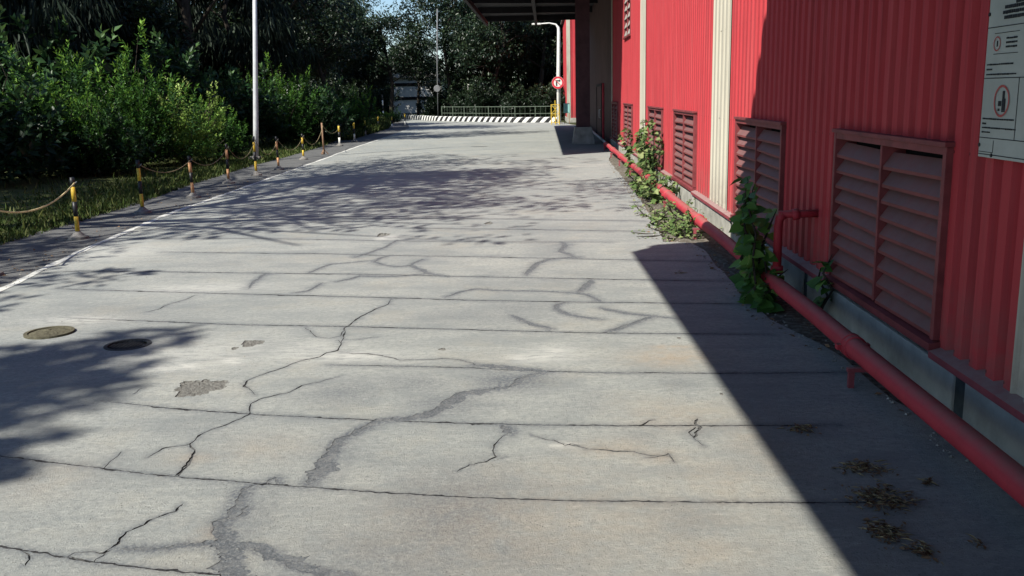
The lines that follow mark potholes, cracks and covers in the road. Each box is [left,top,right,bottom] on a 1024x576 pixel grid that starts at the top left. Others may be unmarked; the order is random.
crack [532,435,675,463]
crack [149,301,479,476]
manhole cover [23,326,75,340]
crack [248,240,670,332]
crack [640,418,704,446]
crack [458,425,513,471]
manhole cover [103,338,152,351]
crack [69,504,183,563]
